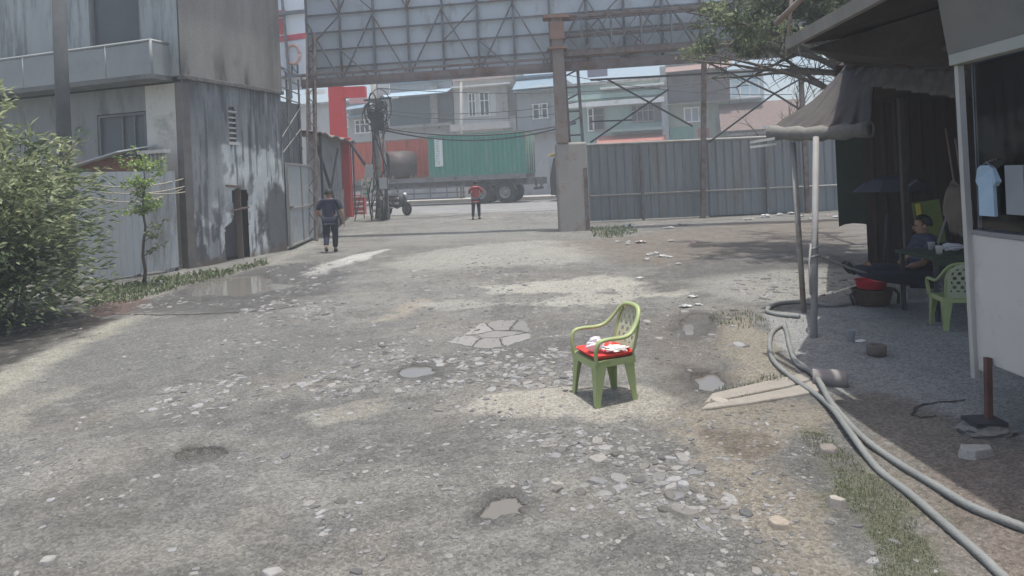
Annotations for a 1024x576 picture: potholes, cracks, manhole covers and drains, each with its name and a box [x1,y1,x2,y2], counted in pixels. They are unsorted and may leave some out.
pothole [459,485,546,530]
pothole [674,368,740,395]
pothole [385,361,449,382]
pothole [667,310,726,341]
crack [472,320,526,347]
pothole [153,440,247,471]
